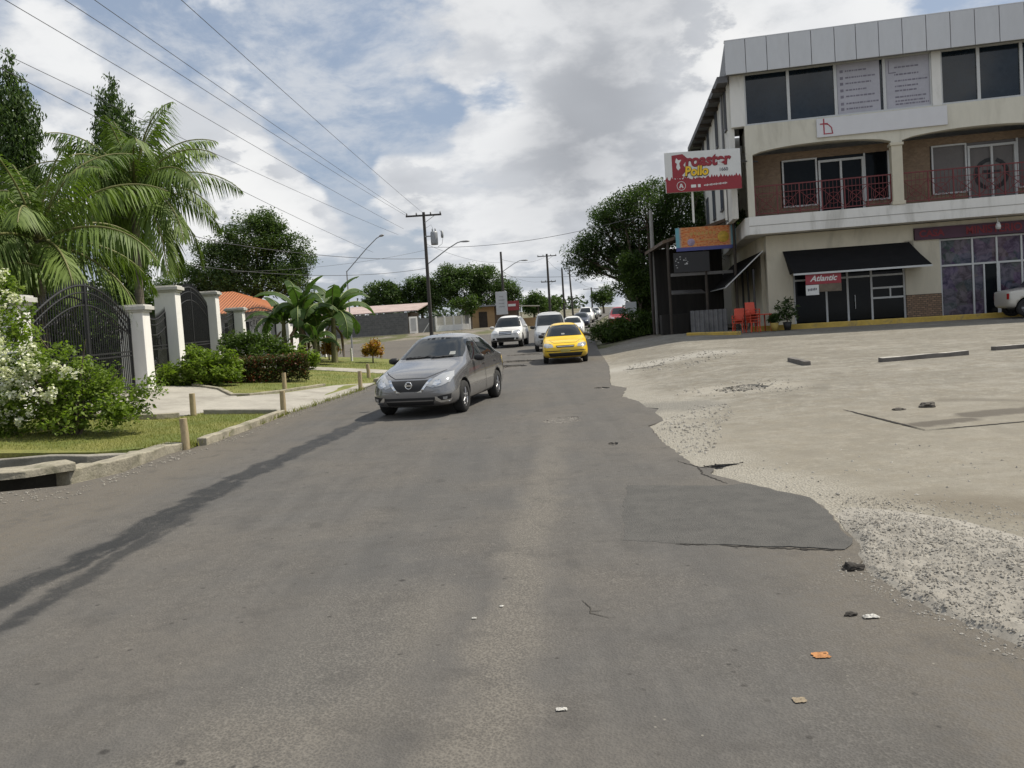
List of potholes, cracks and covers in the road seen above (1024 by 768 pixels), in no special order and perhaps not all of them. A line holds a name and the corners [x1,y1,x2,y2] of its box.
pothole [716,384,772,393]
crack [682,543,838,551]
